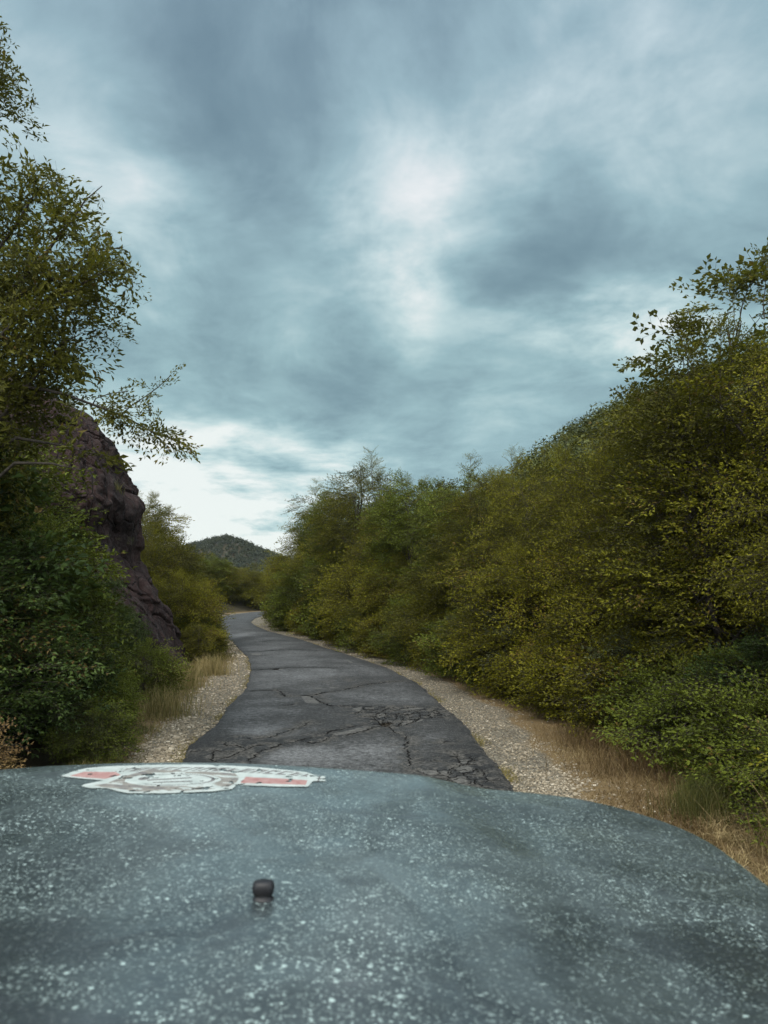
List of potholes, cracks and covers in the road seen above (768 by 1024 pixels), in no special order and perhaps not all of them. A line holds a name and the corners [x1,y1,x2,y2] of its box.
crack [184,681,507,790]
